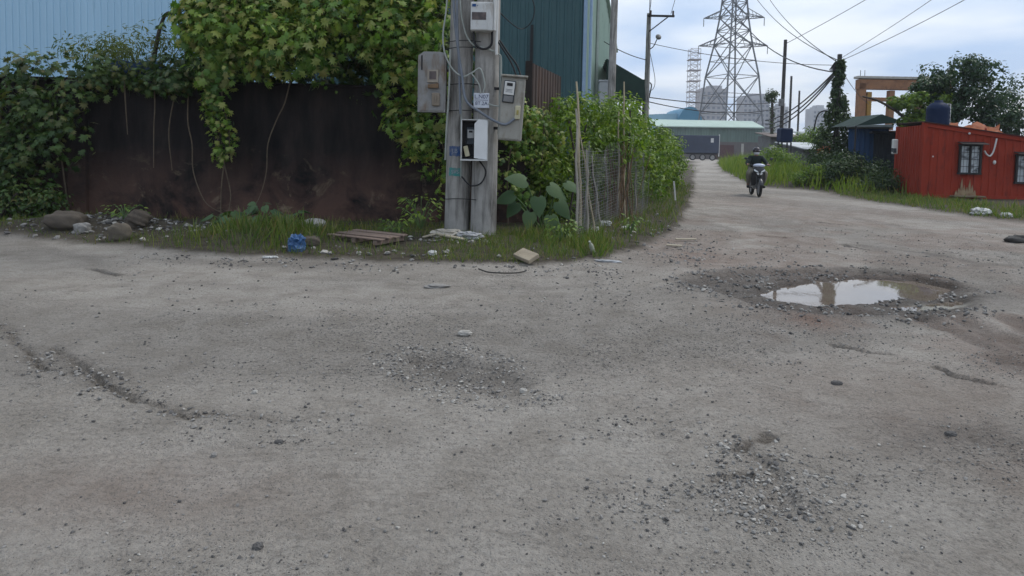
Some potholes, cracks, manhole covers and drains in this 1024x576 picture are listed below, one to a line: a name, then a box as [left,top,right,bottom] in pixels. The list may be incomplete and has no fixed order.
pothole [366,342,570,412]
pothole [704,430,870,551]
crack [0,321,349,423]
pothole [662,264,1003,327]
crack [930,366,997,386]
crack [827,343,892,355]
